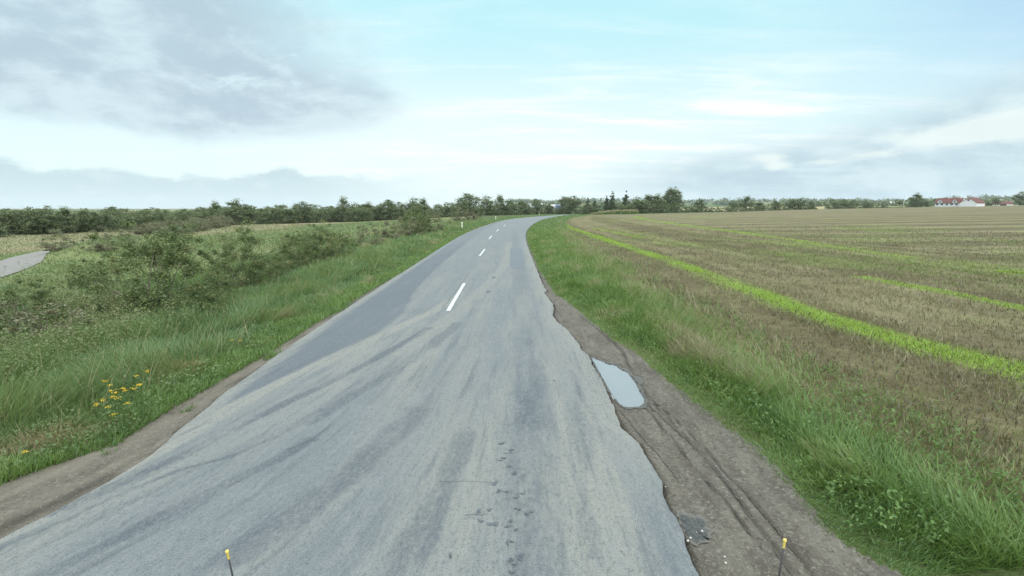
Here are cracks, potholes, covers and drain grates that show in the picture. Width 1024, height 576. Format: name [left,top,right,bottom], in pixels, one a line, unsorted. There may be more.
pothole [589,354,649,409]
pothole [676,510,714,547]
